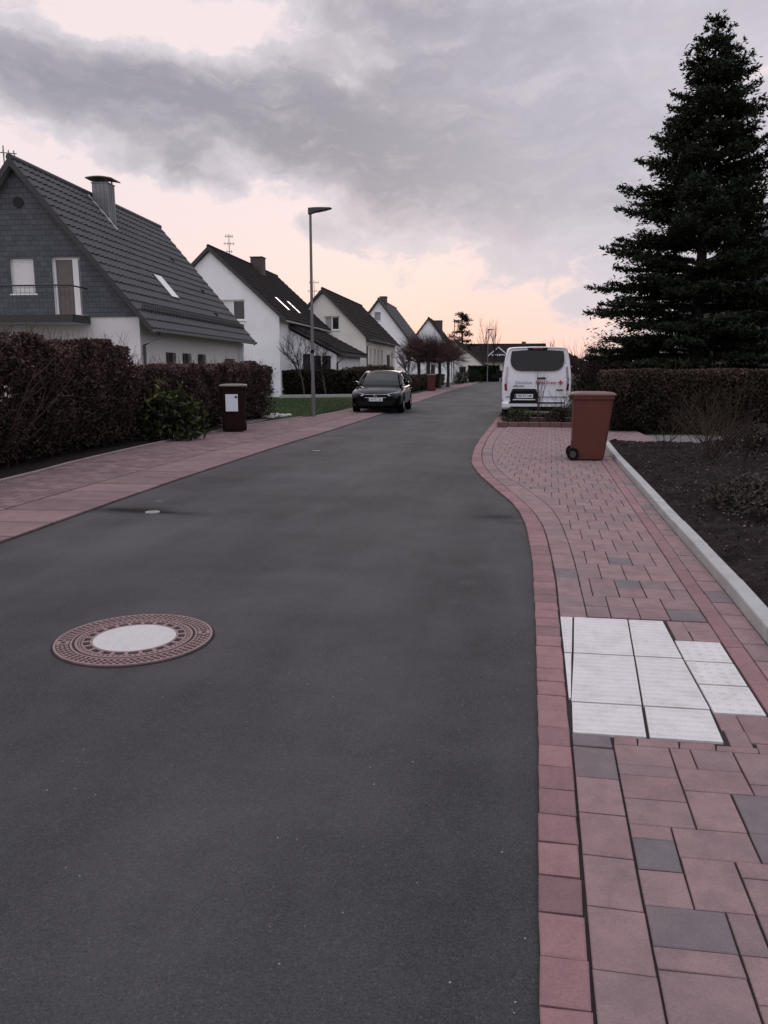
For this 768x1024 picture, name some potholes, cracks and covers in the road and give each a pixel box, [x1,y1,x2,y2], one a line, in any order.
manhole cover [50,614,215,668]
